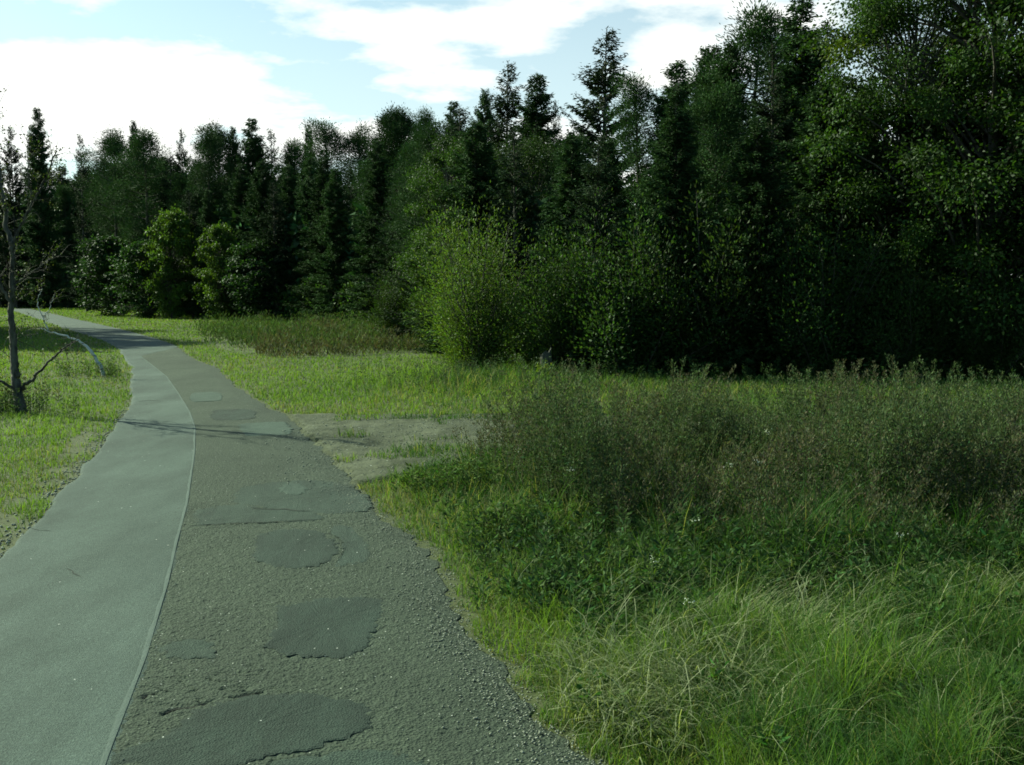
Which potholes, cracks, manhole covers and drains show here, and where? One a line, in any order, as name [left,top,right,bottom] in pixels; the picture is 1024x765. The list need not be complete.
crack [143,694,208,715]
